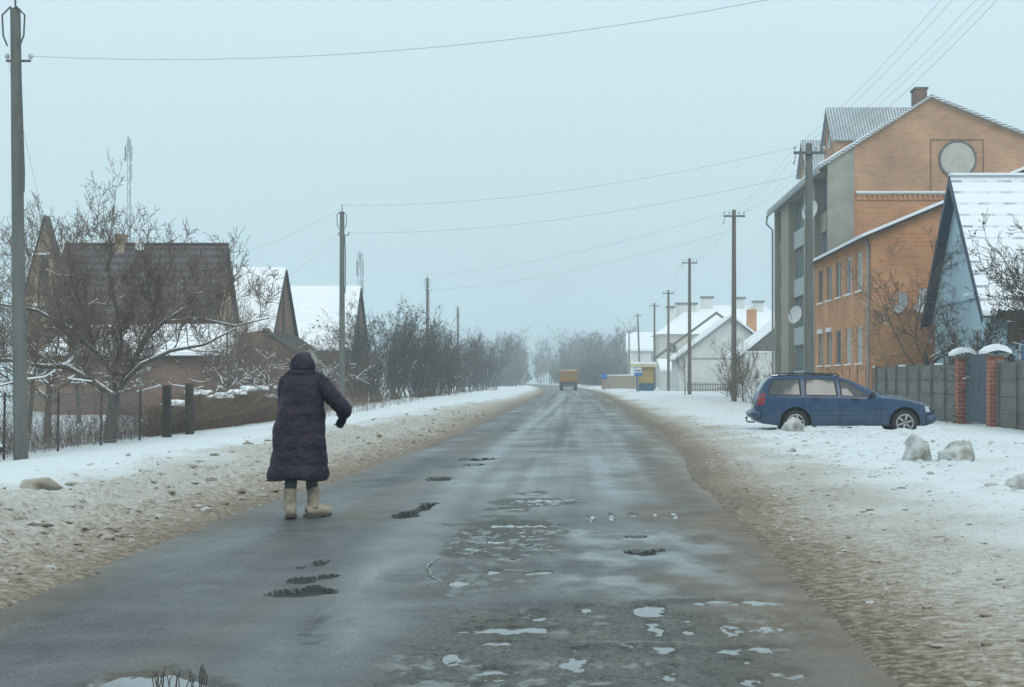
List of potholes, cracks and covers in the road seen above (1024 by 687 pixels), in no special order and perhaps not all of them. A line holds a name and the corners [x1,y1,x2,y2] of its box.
crack [426,556,445,584]
pothole [264,585,338,598]
pothole [390,503,439,519]
pothole [286,574,339,584]
pothole [80,664,238,687]
pothole [487,498,587,507]
